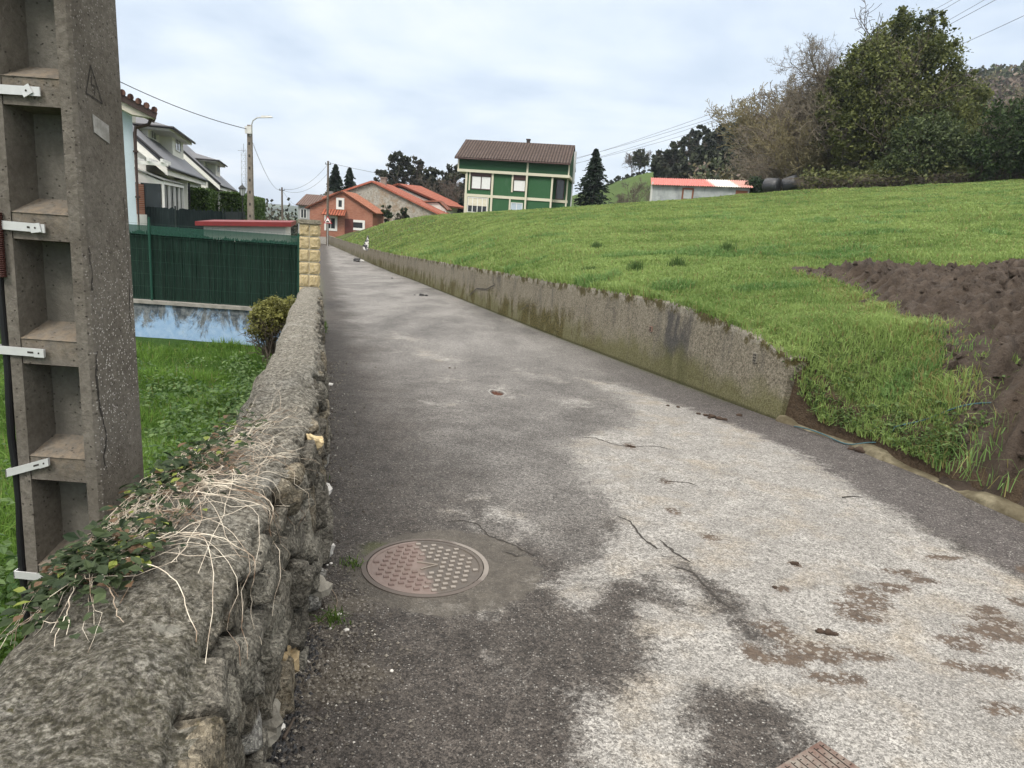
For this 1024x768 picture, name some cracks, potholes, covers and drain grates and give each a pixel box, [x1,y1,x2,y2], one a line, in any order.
crack [446,520,535,556]
crack [617,516,735,610]
manhole cover [361,539,489,598]
